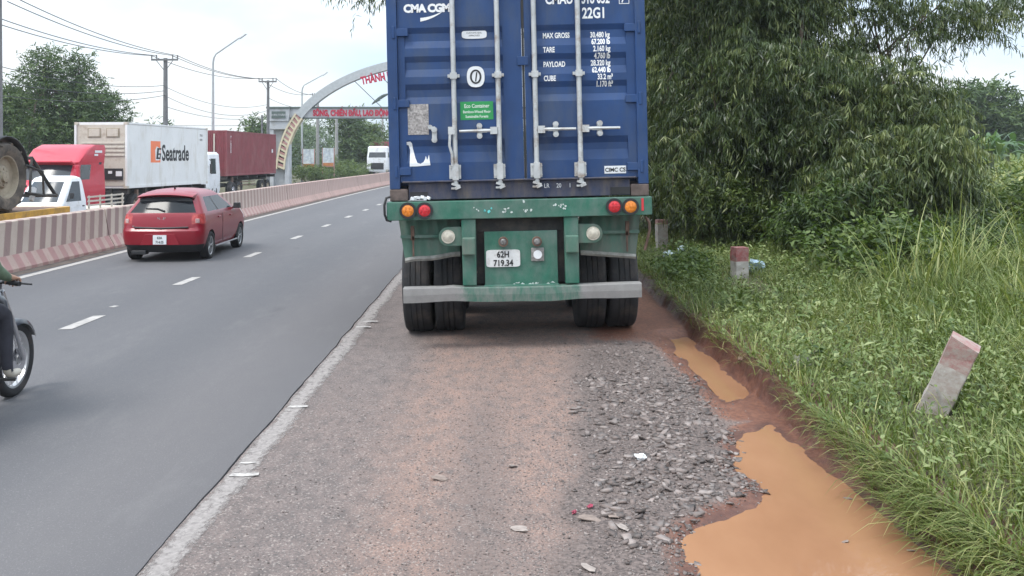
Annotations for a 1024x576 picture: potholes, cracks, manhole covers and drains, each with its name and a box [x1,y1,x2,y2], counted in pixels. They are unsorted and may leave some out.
pothole [665,325,760,406]
pothole [661,416,1024,576]
